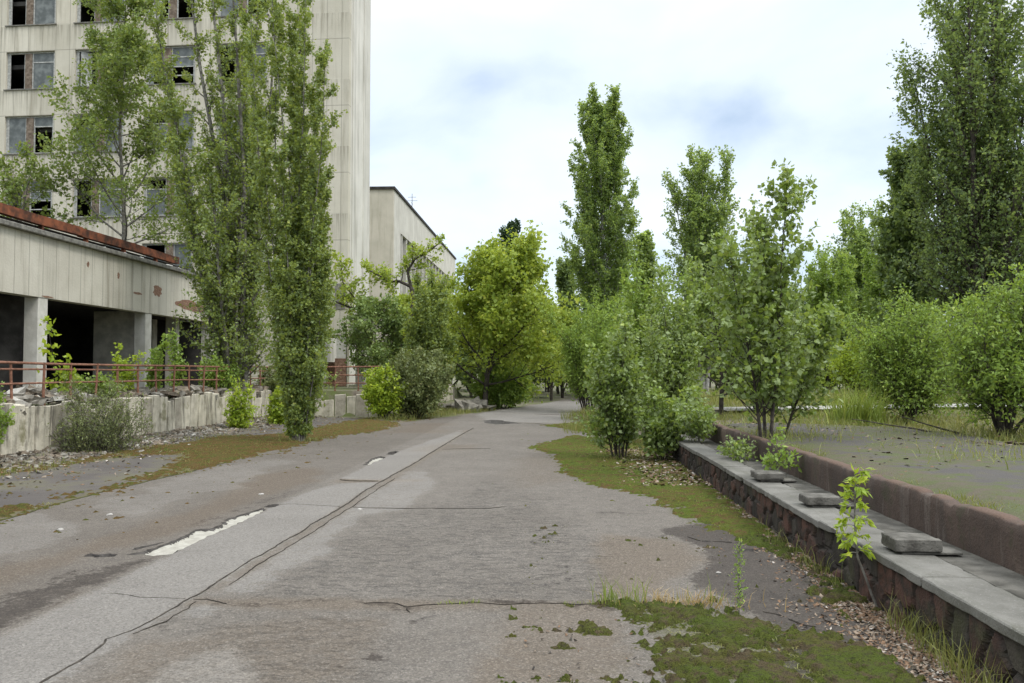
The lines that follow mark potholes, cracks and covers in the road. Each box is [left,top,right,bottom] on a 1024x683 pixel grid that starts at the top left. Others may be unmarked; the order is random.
crack [39,428,591,683]
